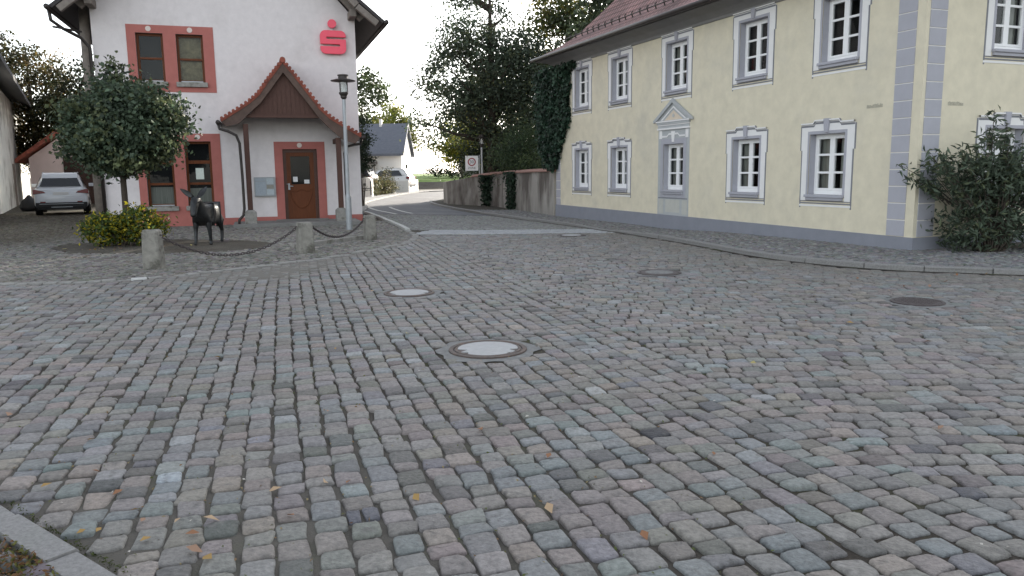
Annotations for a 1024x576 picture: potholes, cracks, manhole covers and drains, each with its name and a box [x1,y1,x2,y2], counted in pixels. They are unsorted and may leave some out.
manhole cover [883,297,955,308]
manhole cover [435,339,541,363]
manhole cover [376,288,444,299]
manhole cover [631,269,690,277]
